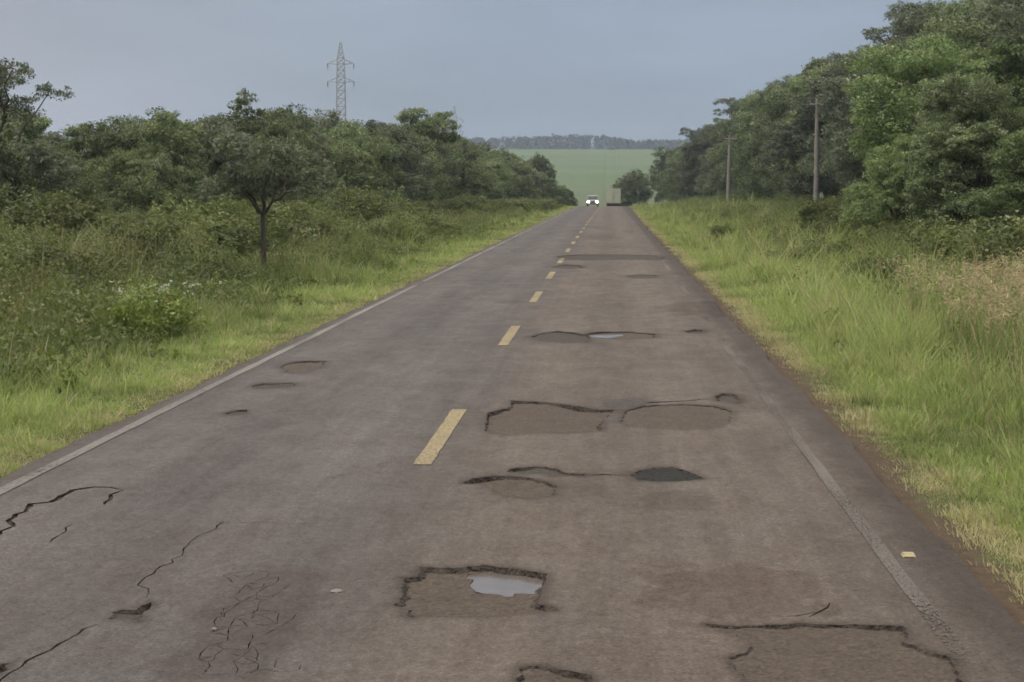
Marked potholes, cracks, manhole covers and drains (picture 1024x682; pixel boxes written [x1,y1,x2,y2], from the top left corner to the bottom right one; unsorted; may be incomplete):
pothole [394,565,559,618]
crack [776,603,830,617]
pothole [109,602,152,621]
pothole [715,393,741,403]
pothole [630,467,705,482]
pothole [280,361,326,374]
pothole [463,476,557,499]
pothole [484,400,615,435]
crack [199,571,302,675]
pothole [516,666,593,682]
crack [0,486,123,542]
crack [0,522,275,682]
